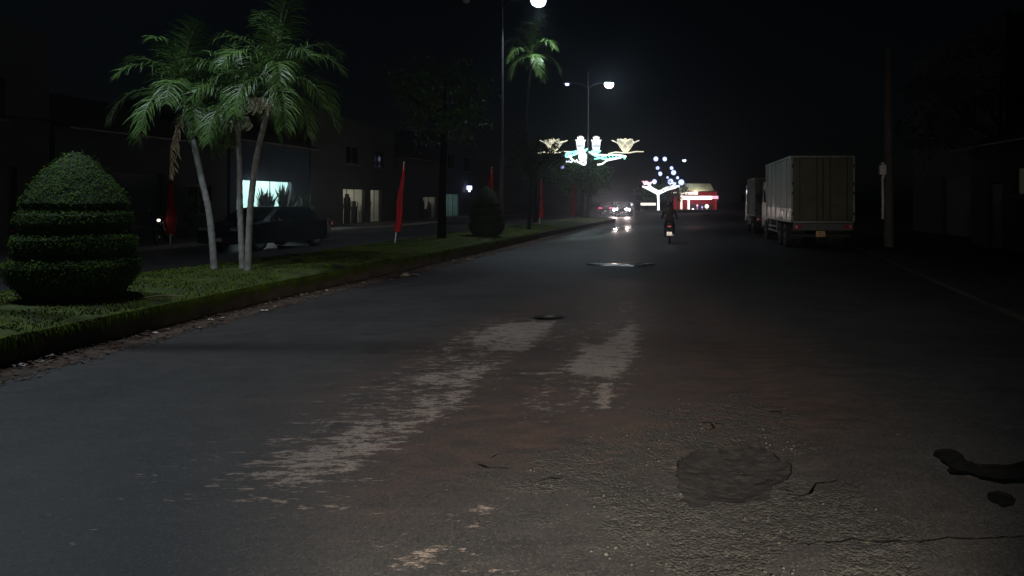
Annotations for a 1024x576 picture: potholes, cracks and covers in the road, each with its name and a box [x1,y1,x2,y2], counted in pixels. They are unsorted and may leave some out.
pothole [987,491,1016,508]
crack [781,480,837,502]
pothole [676,445,792,508]
pothole [933,448,1024,484]
crack [784,535,1024,545]
